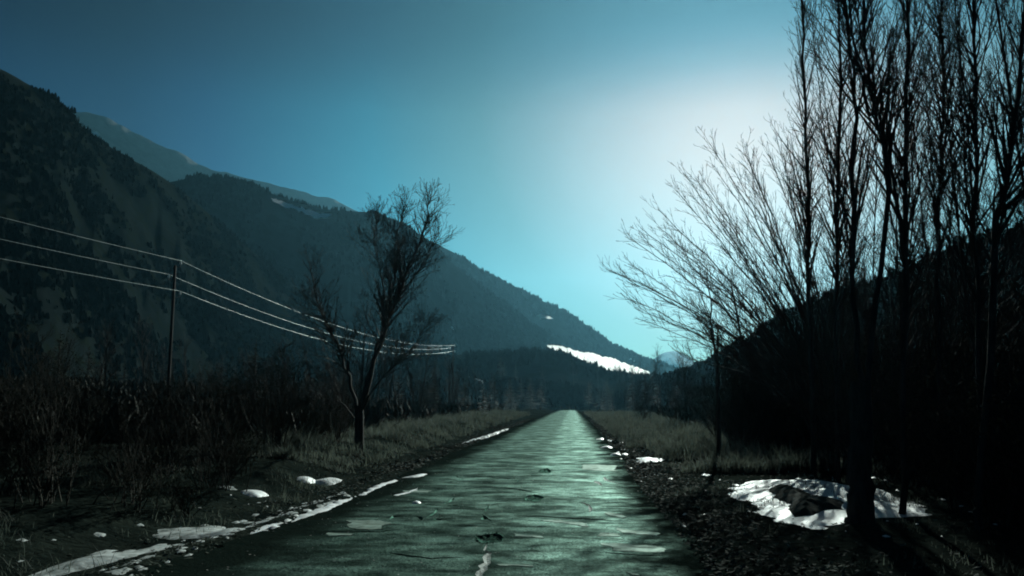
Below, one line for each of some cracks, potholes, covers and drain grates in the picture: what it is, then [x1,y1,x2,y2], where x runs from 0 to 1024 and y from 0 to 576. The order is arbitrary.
crack [336,476,537,532]
pothole [475,532,504,543]
pothole [524,494,544,502]
